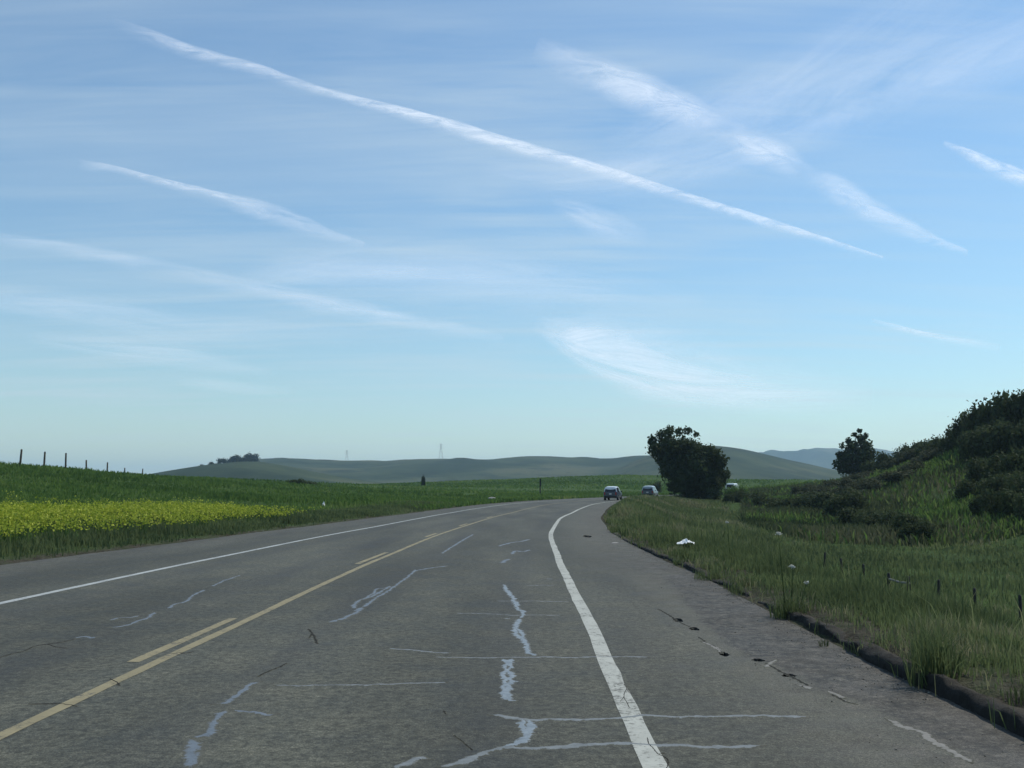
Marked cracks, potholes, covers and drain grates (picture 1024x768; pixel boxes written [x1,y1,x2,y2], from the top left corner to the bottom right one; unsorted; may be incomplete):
crack [658,609,724,654]
crack [394,684,809,768]
crack [764,663,858,705]
crack [307,629,318,644]
